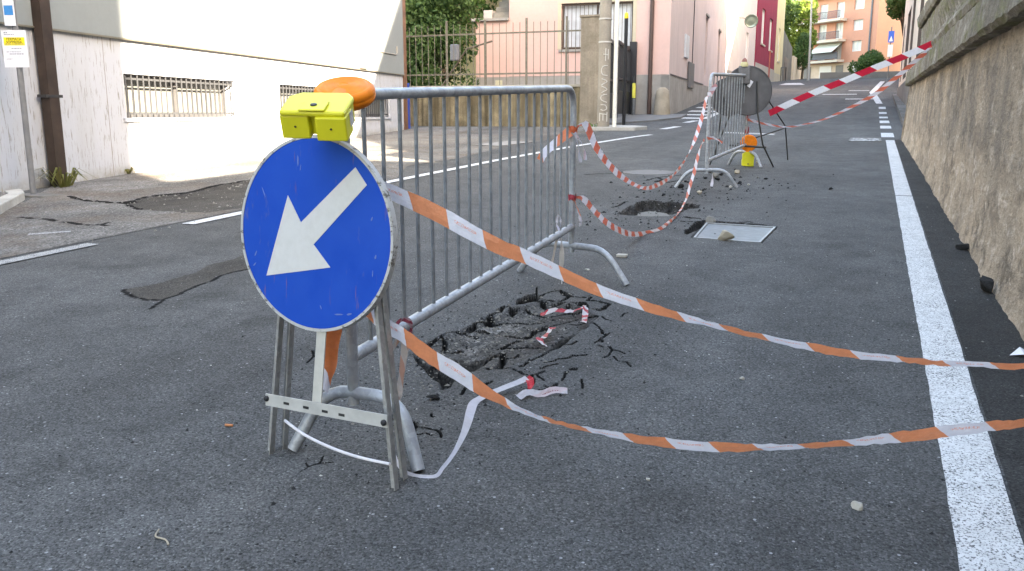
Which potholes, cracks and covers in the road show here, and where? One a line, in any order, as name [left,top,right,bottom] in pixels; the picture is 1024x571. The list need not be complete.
crack [16,216,111,227]
crack [297,454,337,473]
pothole [613,201,700,216]
manhole cover [693,222,776,243]
pothole [409,286,636,400]
